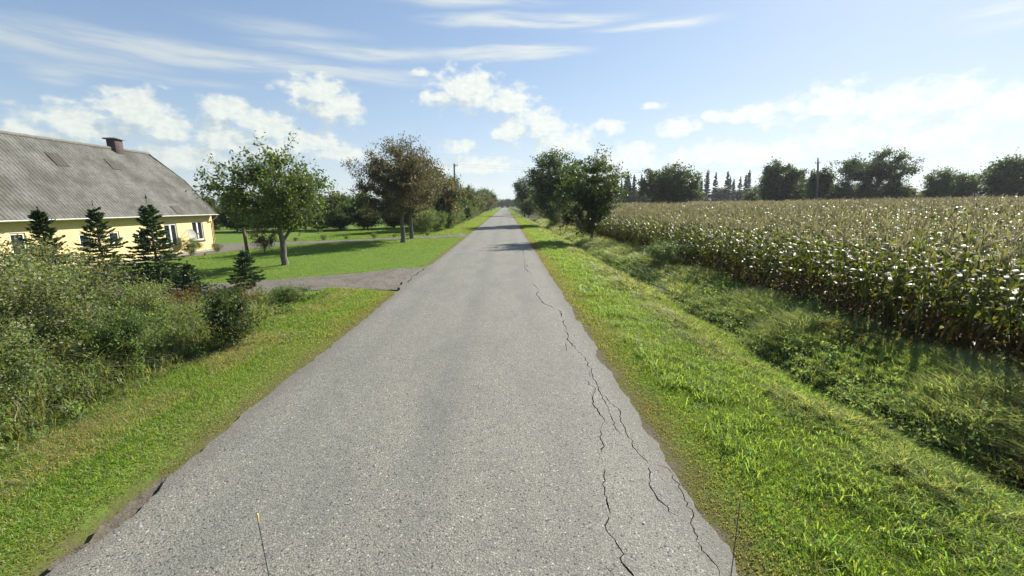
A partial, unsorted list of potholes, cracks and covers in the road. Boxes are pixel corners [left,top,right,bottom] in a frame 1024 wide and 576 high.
crack [563,320,720,576]
